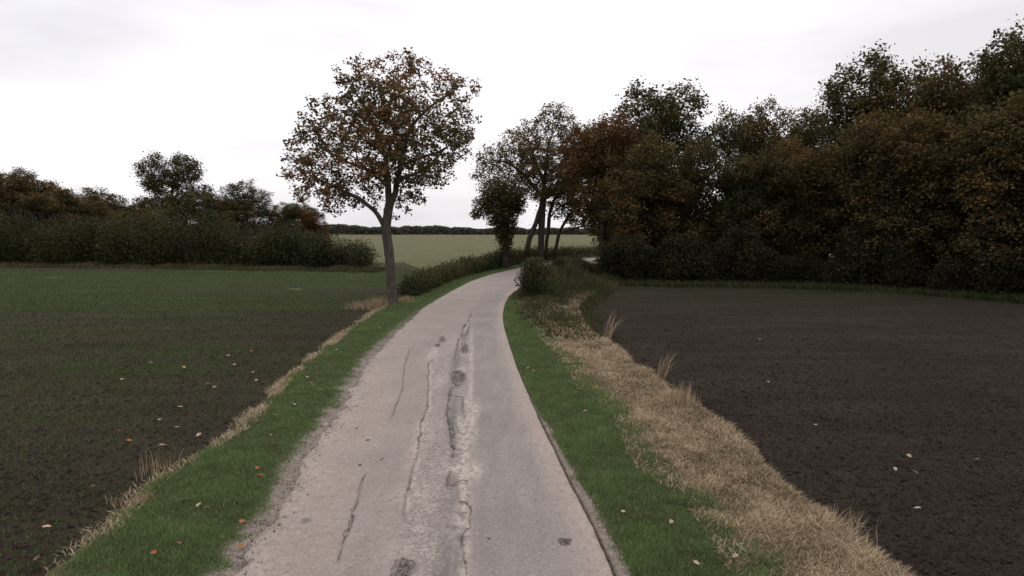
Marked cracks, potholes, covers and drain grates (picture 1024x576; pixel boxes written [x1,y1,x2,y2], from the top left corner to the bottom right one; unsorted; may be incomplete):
crack [447,475,472,564]
pothole [450,370,466,385]
pothole [390,557,415,576]
crack [446,388,464,456]
crack [338,475,365,559]
